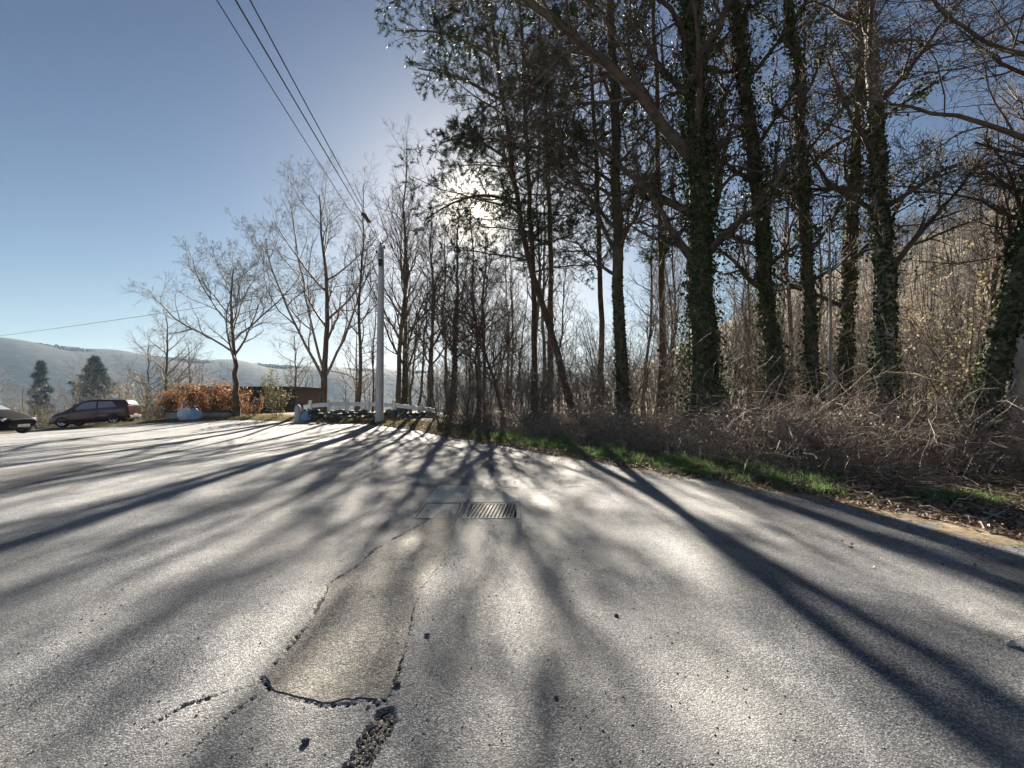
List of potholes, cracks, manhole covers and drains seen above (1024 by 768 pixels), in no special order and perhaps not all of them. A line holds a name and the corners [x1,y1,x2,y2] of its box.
manhole cover [412,503,464,519]
drain grate [462,503,520,519]
pothole [345,710,396,768]
